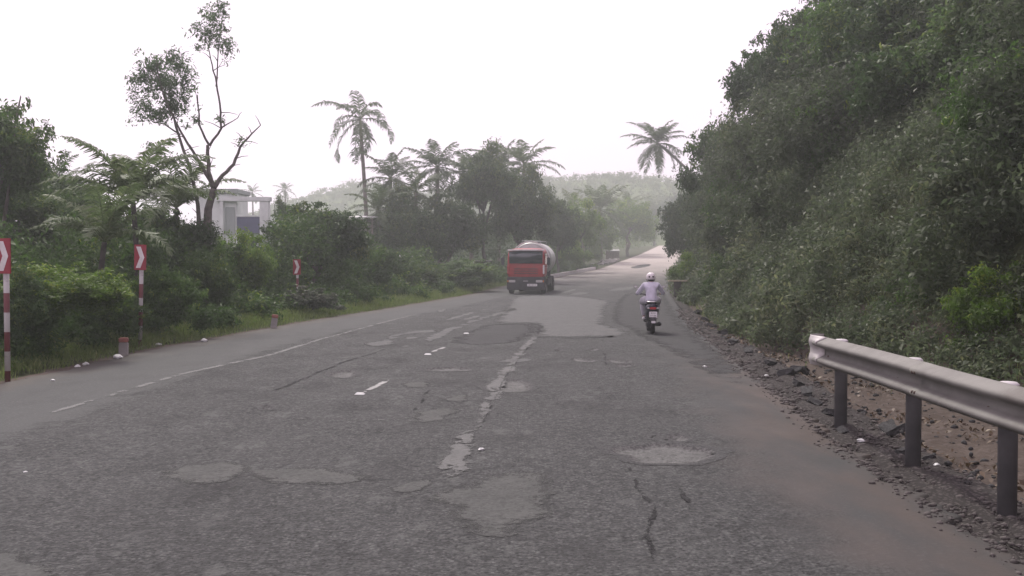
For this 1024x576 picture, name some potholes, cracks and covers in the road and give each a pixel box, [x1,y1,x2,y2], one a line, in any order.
crack [277,349,385,389]
crack [629,459,708,558]
